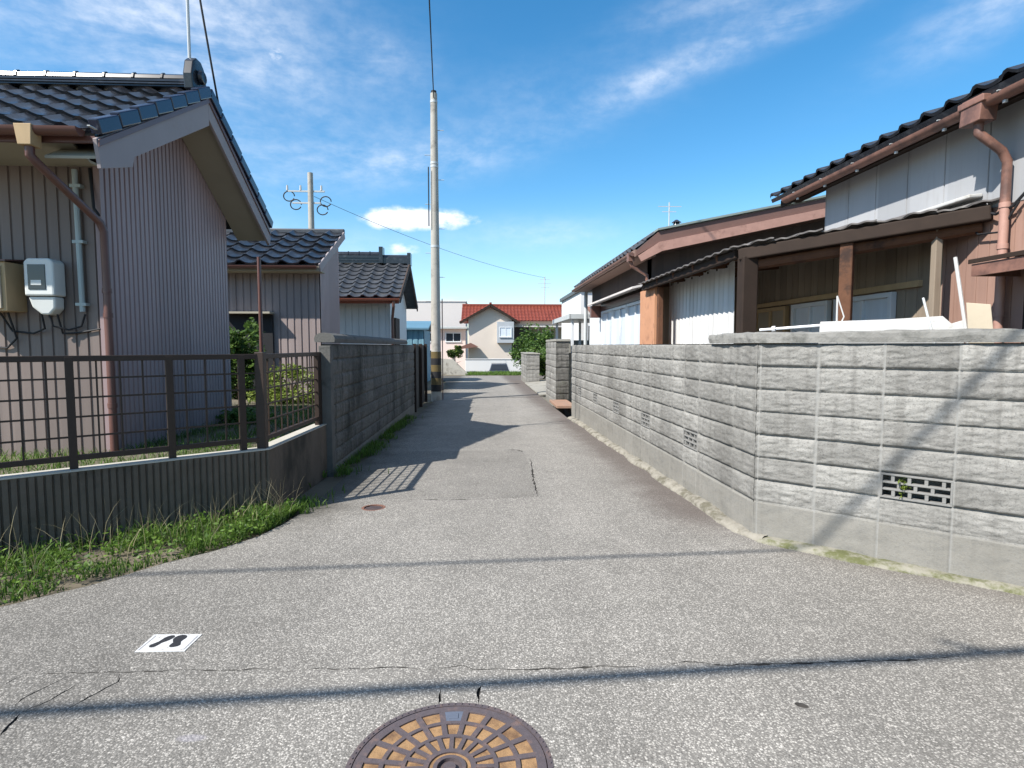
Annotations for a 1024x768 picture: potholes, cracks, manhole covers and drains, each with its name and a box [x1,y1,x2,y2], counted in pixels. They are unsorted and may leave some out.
manhole cover [345,703,554,768]
crack [0,656,959,736]
